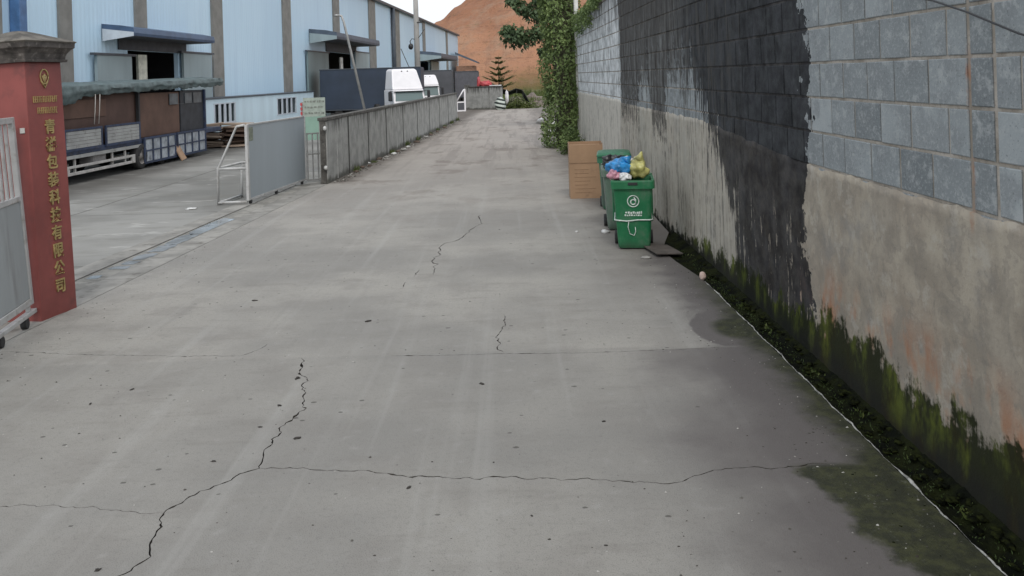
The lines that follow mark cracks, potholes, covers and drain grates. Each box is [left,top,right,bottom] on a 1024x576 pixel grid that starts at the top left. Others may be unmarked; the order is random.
crack [1,359,825,576]
crack [400,216,481,289]
crack [405,315,713,356]
